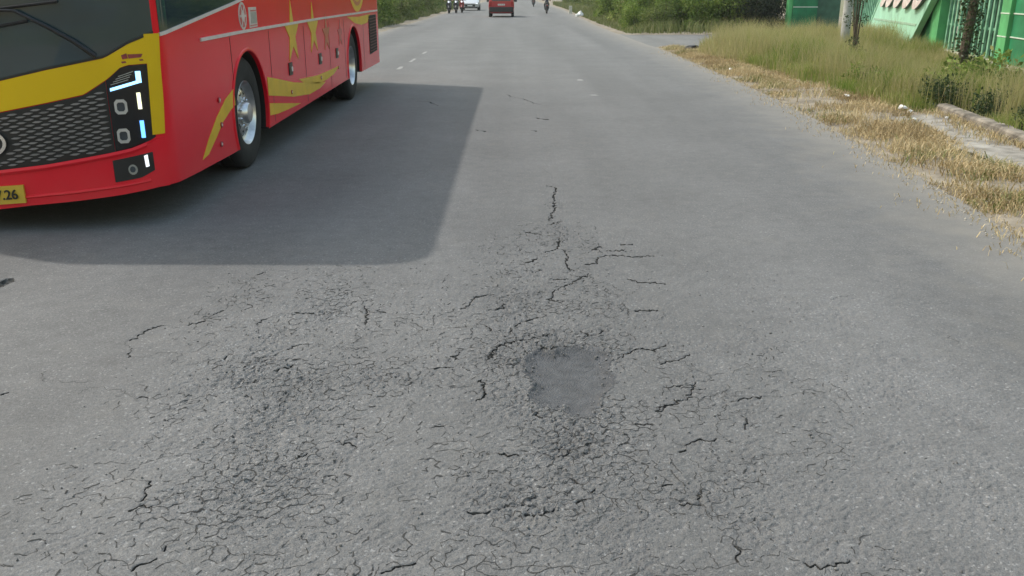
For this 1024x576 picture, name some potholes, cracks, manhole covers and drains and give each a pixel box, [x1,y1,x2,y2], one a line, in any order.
crack [368,203,906,576]
crack [2,265,431,576]
